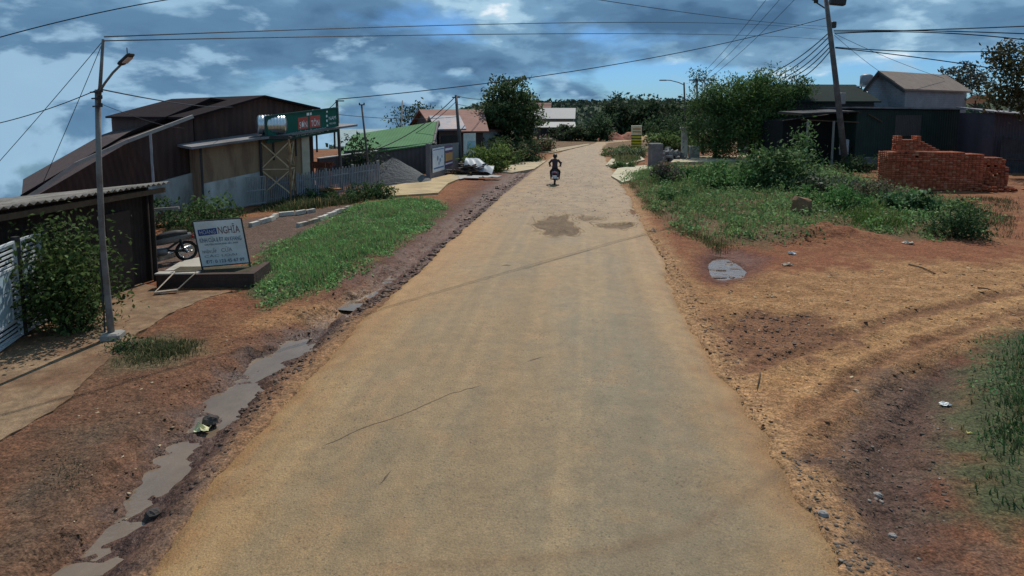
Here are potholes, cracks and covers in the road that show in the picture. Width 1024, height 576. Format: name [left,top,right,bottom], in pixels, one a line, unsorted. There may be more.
crack [323,387,474,446]
